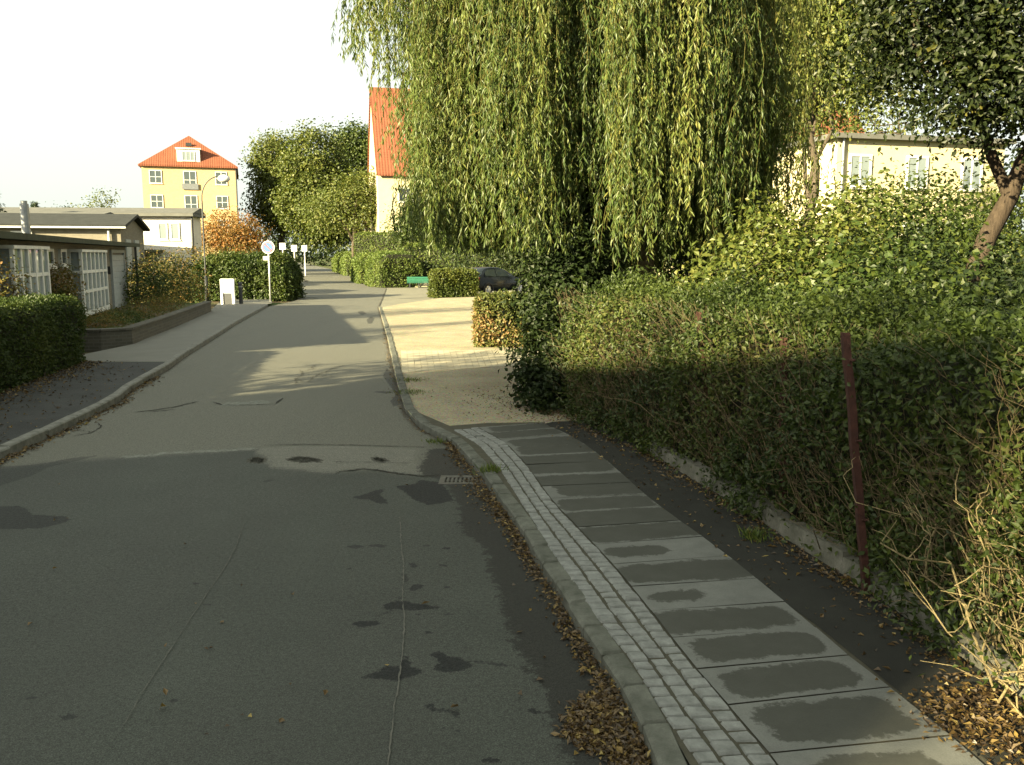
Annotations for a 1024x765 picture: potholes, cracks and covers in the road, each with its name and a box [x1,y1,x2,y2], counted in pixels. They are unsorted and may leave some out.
crack [387,516,405,765]
crack [98,521,246,757]
crack [139,401,259,412]
